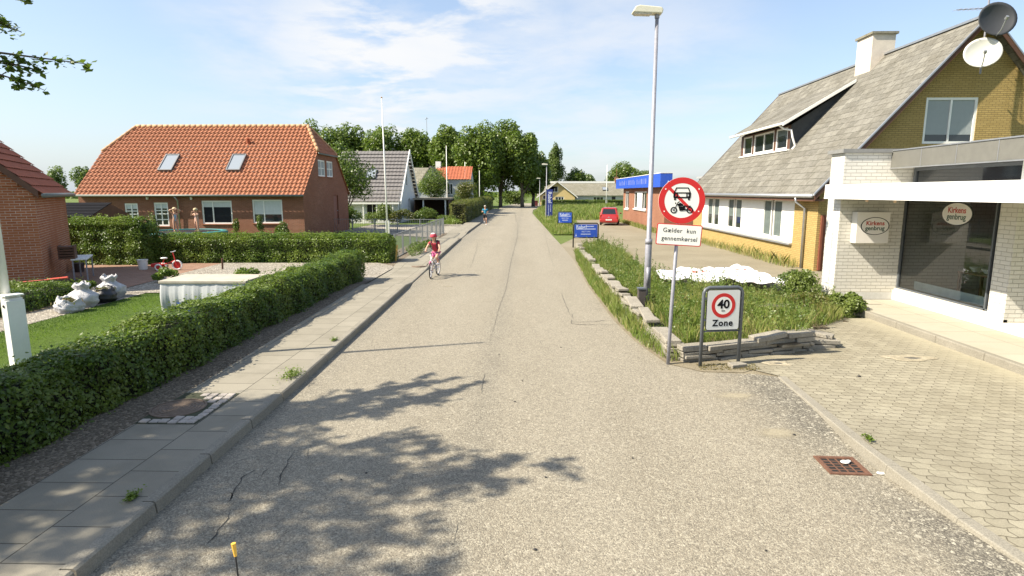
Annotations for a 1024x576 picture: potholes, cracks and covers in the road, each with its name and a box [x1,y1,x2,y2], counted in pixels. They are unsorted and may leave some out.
drain grate [813,455,873,476]
manhole cover [149,398,207,418]
crack [204,450,309,547]
